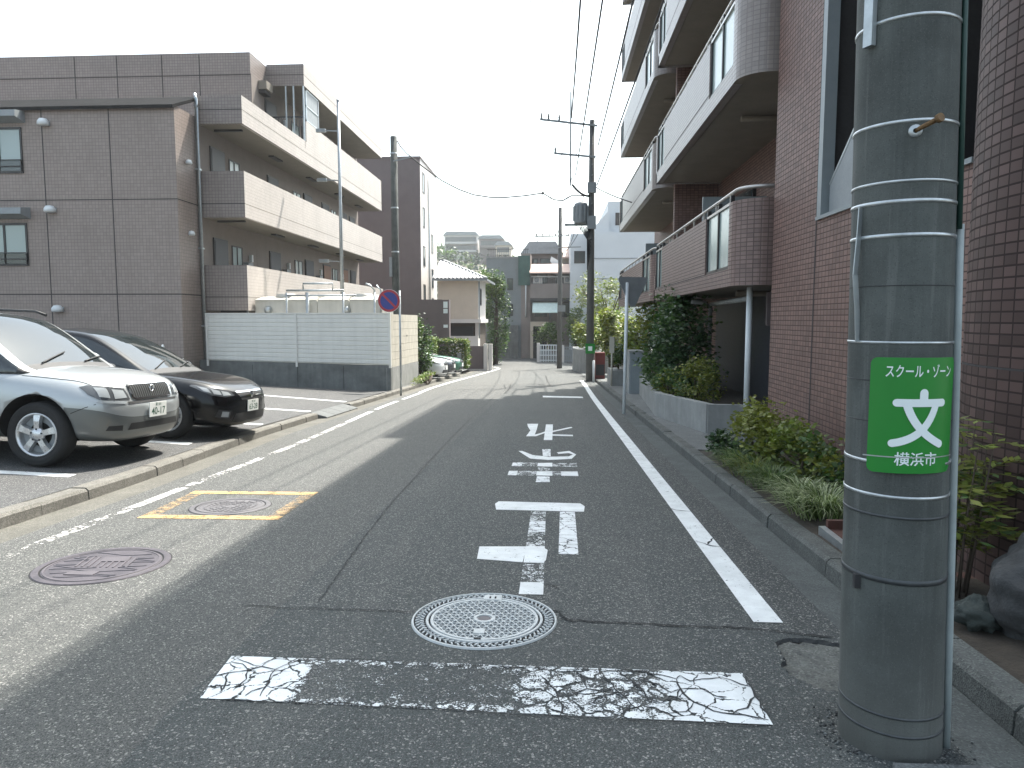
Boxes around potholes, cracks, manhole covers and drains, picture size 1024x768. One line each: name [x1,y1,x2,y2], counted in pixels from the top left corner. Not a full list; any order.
manhole cover [188,498,272,516]
pothole [775,638,840,691]
manhole cover [411,593,557,650]
manhole cover [28,547,172,586]
